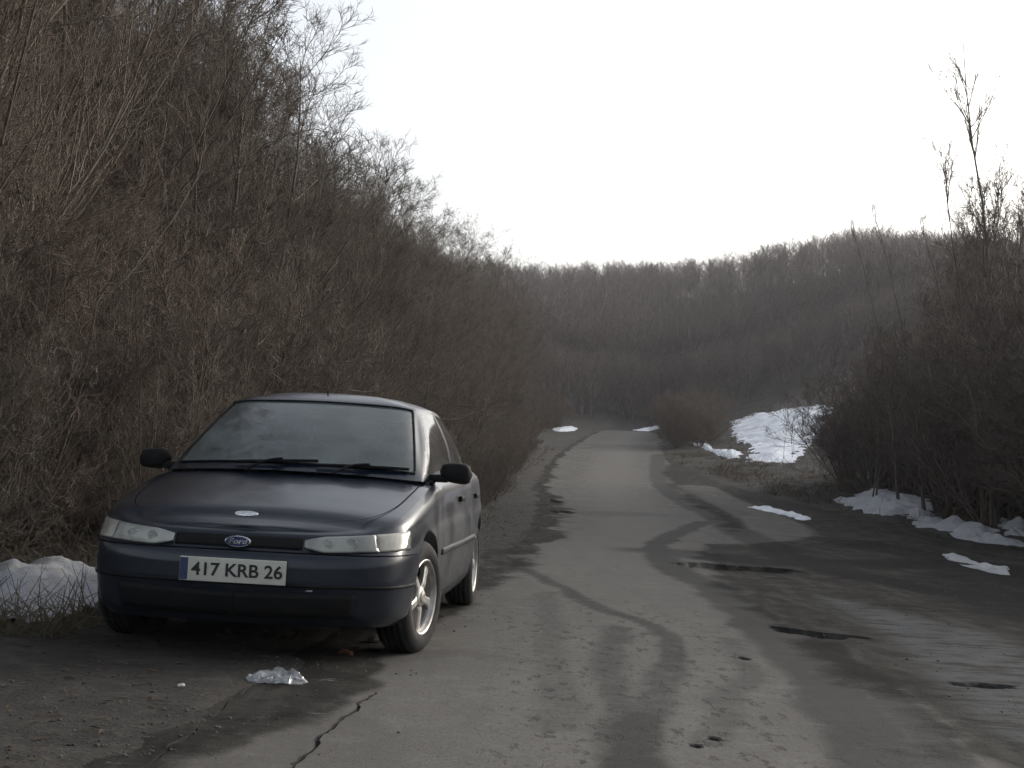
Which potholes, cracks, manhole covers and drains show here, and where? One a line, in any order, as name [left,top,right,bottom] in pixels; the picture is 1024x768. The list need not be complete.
pothole [670,562,800,574]
pothole [943,681,1019,690]
crack [289,692,377,768]
pothole [768,626,871,640]
